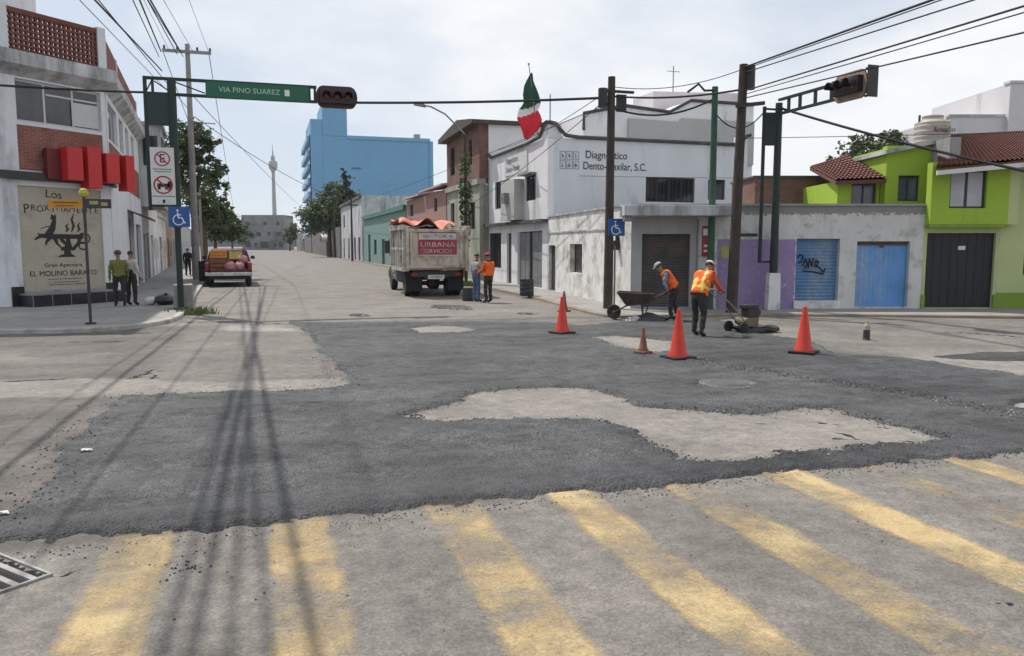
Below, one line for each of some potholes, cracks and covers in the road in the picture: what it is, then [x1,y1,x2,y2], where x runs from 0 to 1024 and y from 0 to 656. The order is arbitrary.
manhole cover [699,378,756,388]
drain grate [0,552,53,594]
